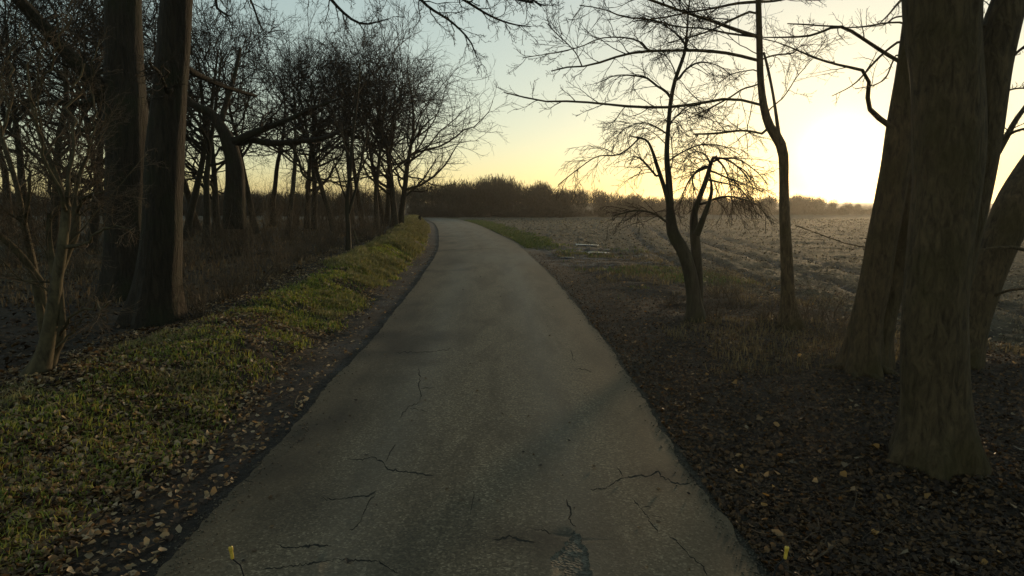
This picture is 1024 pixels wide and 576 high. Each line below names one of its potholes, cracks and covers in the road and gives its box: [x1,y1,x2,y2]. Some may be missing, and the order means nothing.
crack [323,444,435,532]
crack [397,349,449,418]
crack [262,542,397,573]
crack [494,468,708,576]
